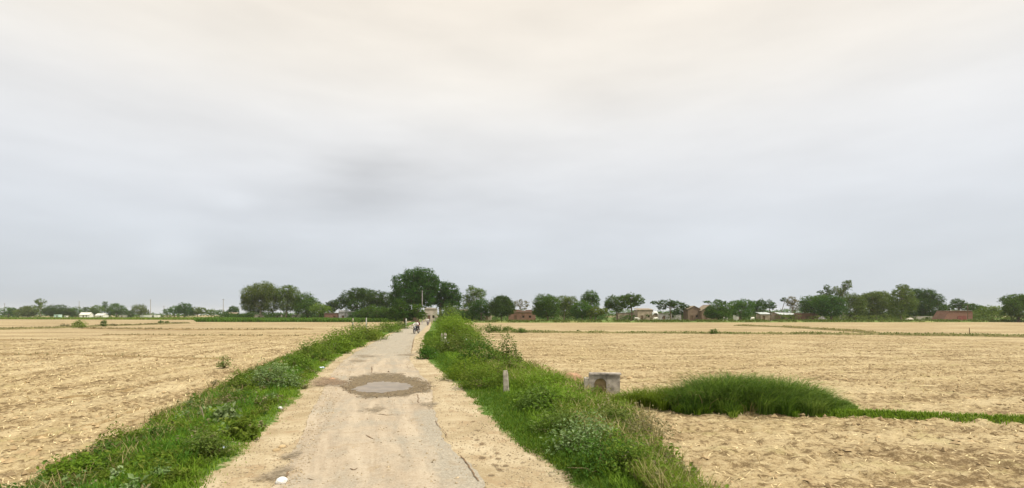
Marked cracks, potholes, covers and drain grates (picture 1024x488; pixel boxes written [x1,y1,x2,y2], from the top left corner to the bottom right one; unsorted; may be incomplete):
pothole [341,371,431,399]
